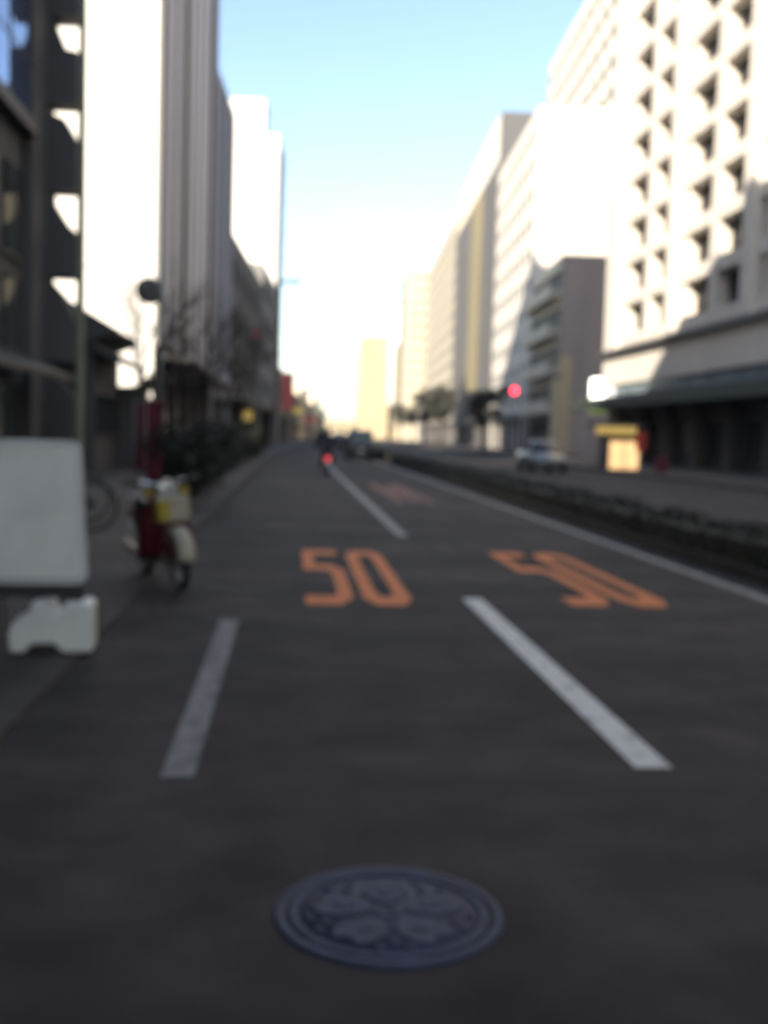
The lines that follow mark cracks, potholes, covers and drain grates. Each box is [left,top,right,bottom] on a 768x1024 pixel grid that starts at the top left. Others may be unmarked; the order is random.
manhole cover [273,867,504,969]
